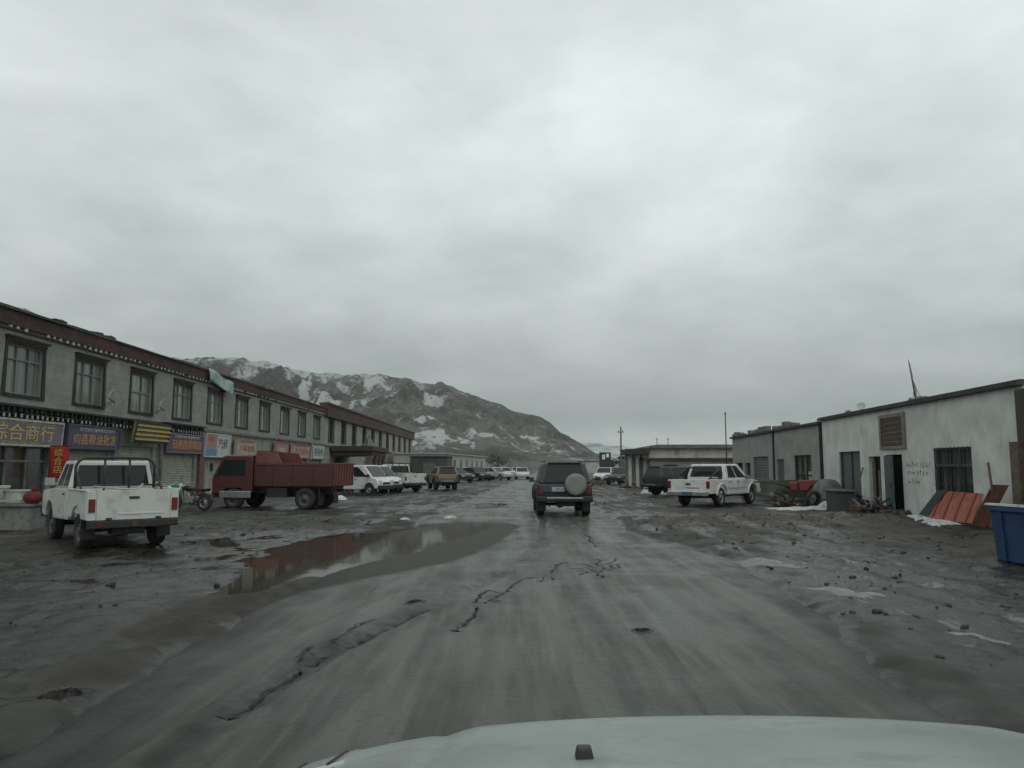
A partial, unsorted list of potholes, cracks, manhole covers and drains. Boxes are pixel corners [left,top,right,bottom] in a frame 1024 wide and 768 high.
crack [450,532,624,632]
crack [213,609,430,720]
pothole [21,684,95,704]
